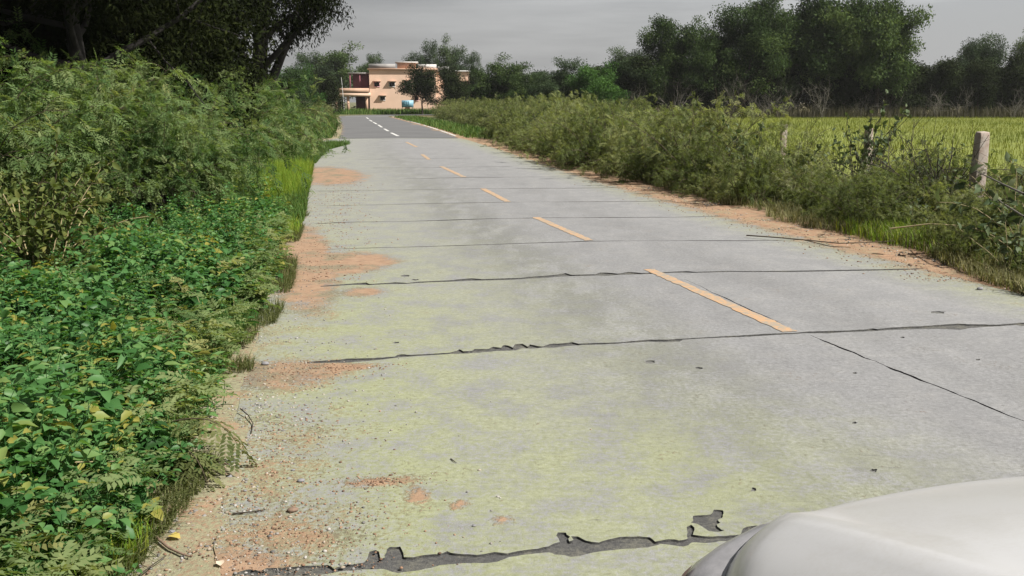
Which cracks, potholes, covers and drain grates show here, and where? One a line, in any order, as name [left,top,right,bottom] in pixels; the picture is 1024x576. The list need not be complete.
crack [813,336,1023,421]
